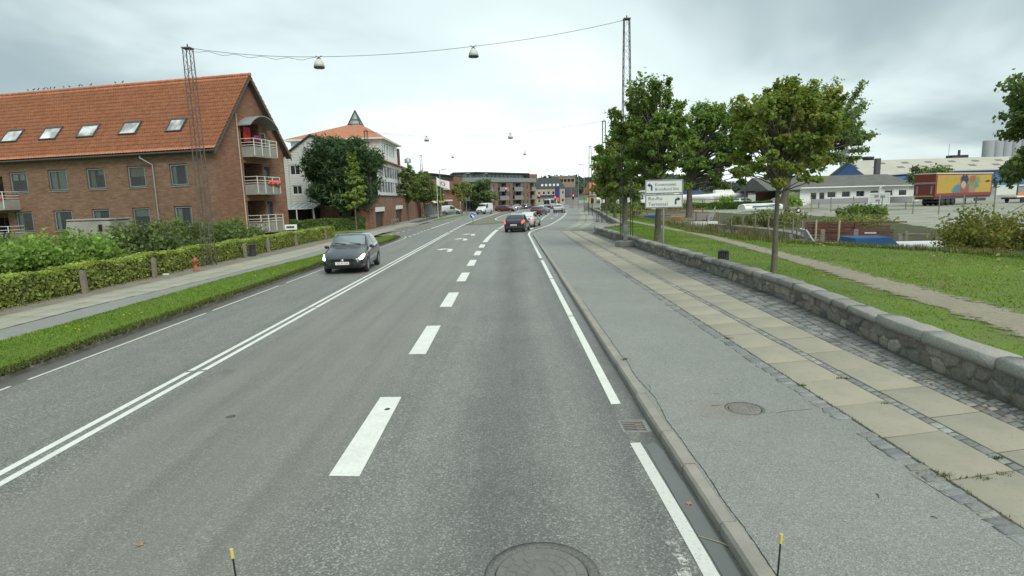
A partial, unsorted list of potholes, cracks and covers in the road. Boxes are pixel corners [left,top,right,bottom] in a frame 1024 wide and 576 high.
drain grate [618,419,652,433]
manhole cover [484,542,600,576]
manhole cover [724,402,766,415]
